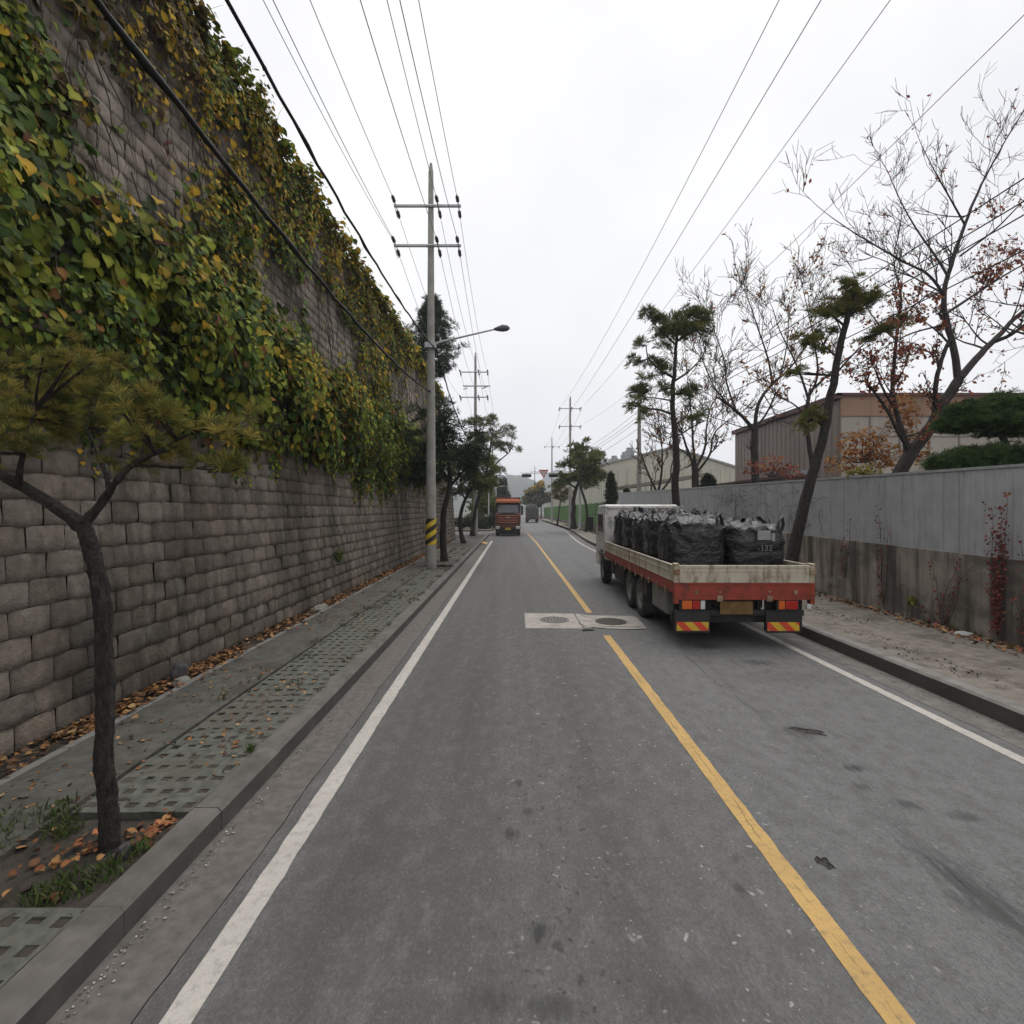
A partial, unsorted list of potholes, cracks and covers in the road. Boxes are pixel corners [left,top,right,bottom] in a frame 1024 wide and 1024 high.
pothole [786,727,827,736]
pothole [814,856,835,870]
